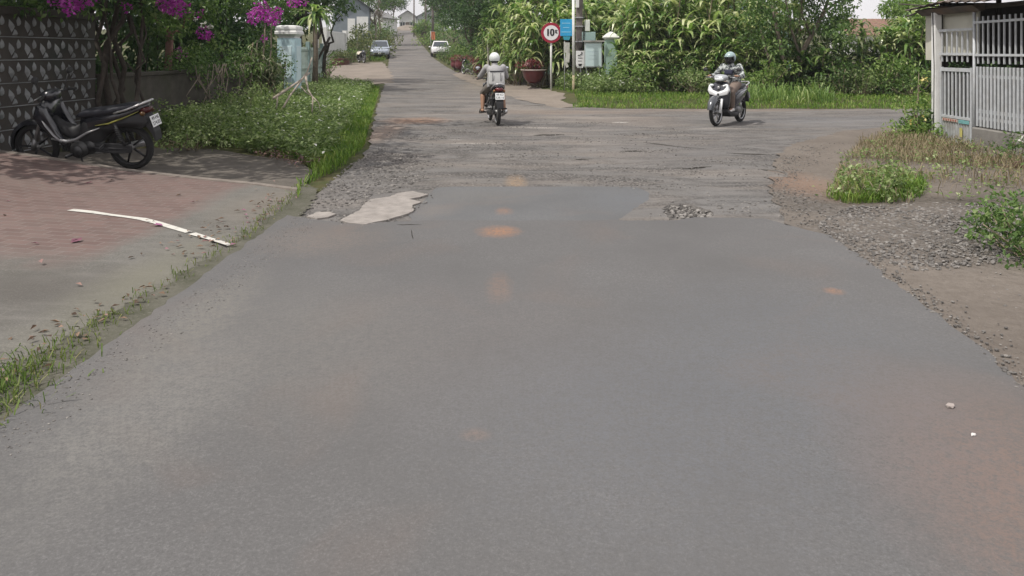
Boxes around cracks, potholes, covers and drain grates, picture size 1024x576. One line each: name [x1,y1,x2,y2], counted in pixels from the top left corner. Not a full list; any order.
pothole [663,204,714,220]
crack [623,142,705,152]
